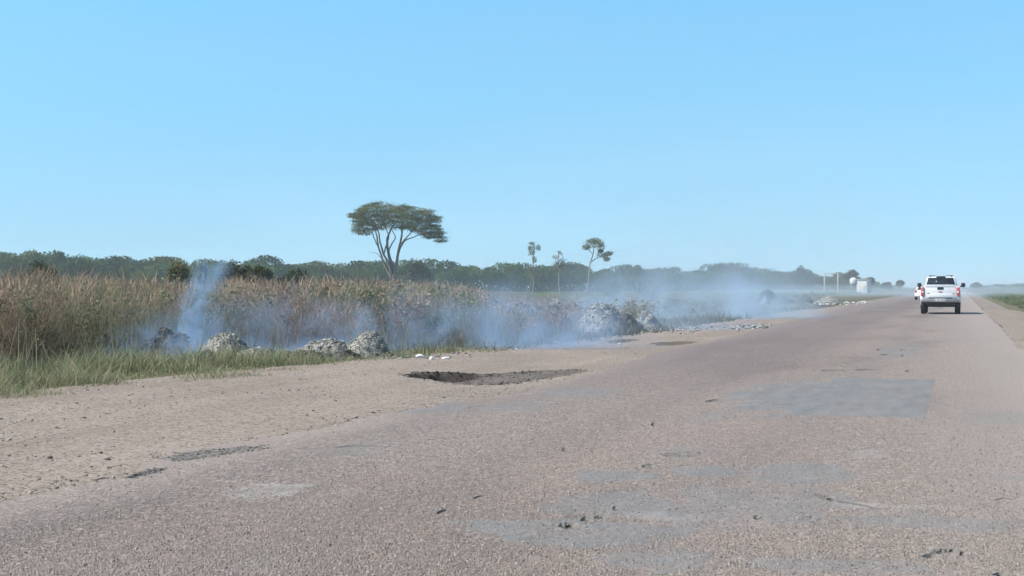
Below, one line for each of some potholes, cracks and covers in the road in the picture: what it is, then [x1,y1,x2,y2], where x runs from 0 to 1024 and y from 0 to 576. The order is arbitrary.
crack [837,501,882,510]
pothole [931,547,962,555]
pothole [398,368,593,386]
